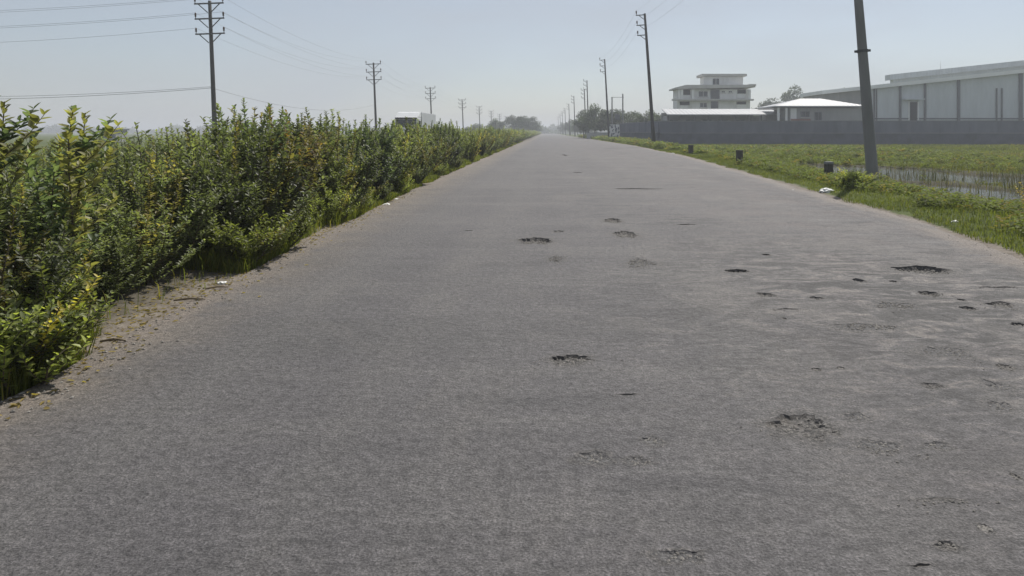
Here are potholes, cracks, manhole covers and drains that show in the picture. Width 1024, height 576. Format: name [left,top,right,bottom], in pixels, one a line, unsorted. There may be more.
pothole [548,354,593,366]
pothole [764,413,843,441]
pothole [891,265,957,274]
pothole [933,541,961,551]
